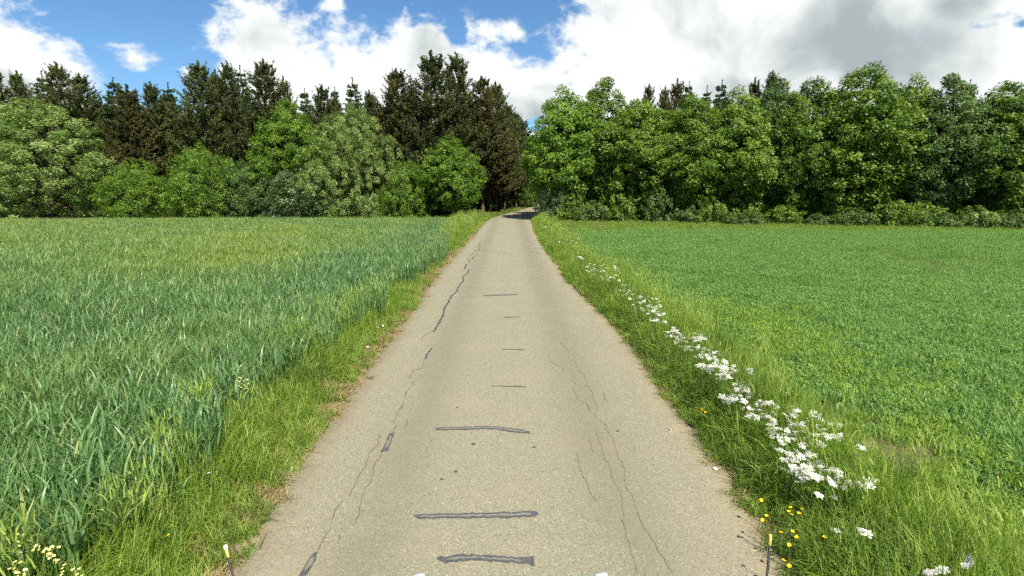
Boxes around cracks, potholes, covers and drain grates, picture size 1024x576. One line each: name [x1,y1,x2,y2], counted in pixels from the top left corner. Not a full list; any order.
crack [549,346,672,573]
crack [317,241,541,551]
